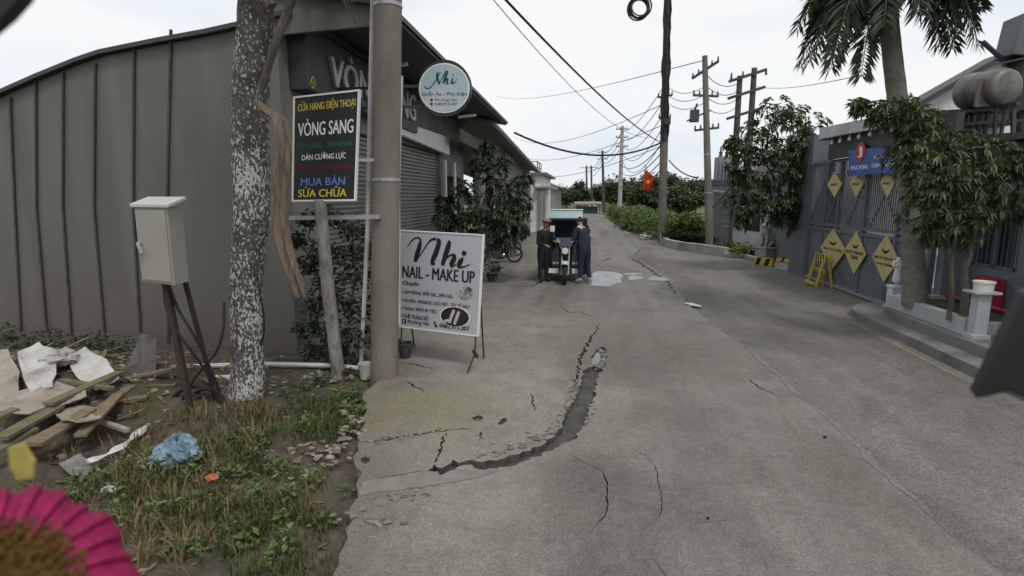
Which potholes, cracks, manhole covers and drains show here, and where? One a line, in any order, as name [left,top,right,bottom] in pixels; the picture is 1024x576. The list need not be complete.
crack [570,453,617,533]
crack [370,428,482,479]
crack [563,308,598,386]
